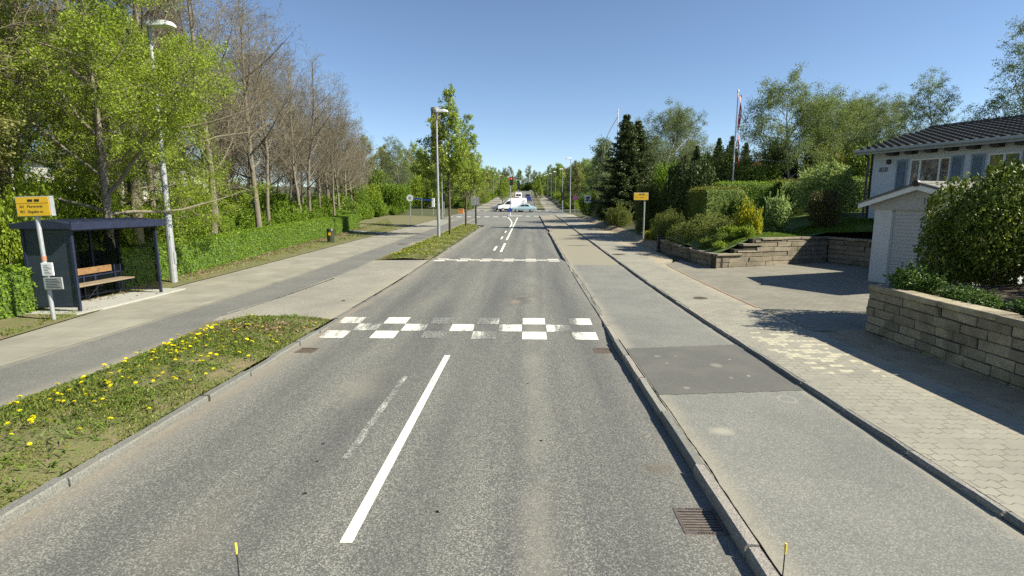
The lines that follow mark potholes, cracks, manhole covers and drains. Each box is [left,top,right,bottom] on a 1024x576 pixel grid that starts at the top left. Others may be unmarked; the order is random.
drain grate [673,508,730,536]
